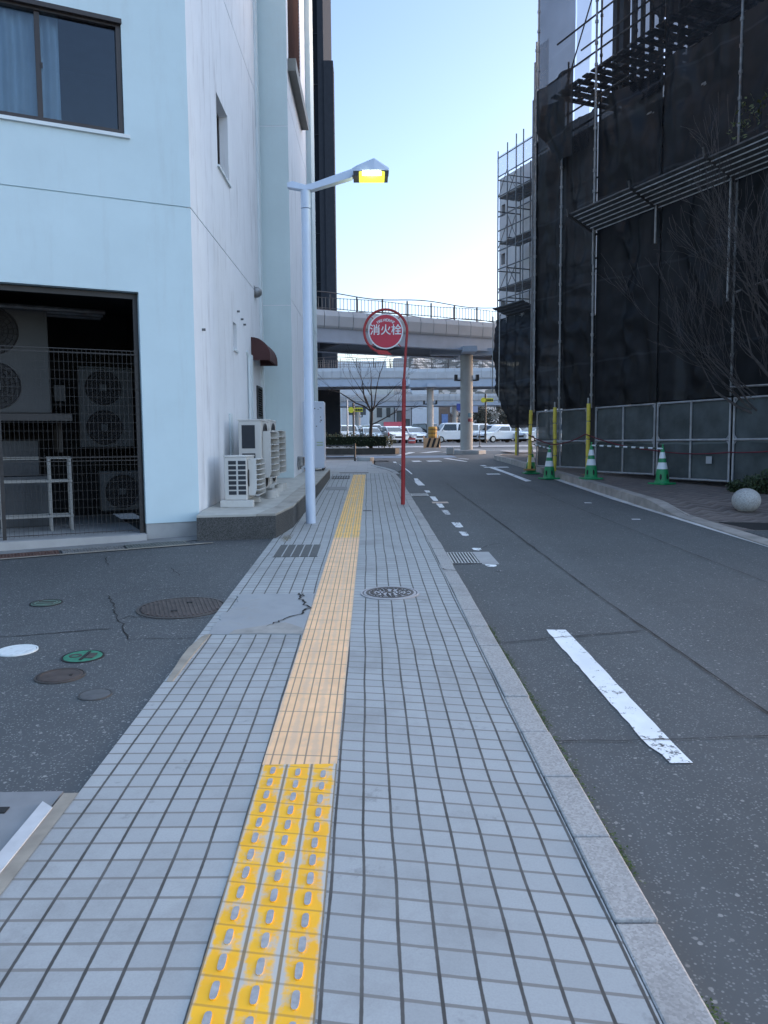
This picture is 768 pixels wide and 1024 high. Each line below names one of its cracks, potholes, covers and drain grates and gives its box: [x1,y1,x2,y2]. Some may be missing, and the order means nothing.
drain grate [446,552,499,565]
crack [267,593,311,626]
manhole cover [360,586,419,600]
utility cover [29,599,63,607]
utility cover [34,668,86,685]
utility cover [0,644,39,657]
utility cover [78,688,112,701]
crack [108,595,208,640]
utility cover [61,650,105,663]
manhole cover [136,597,225,619]
